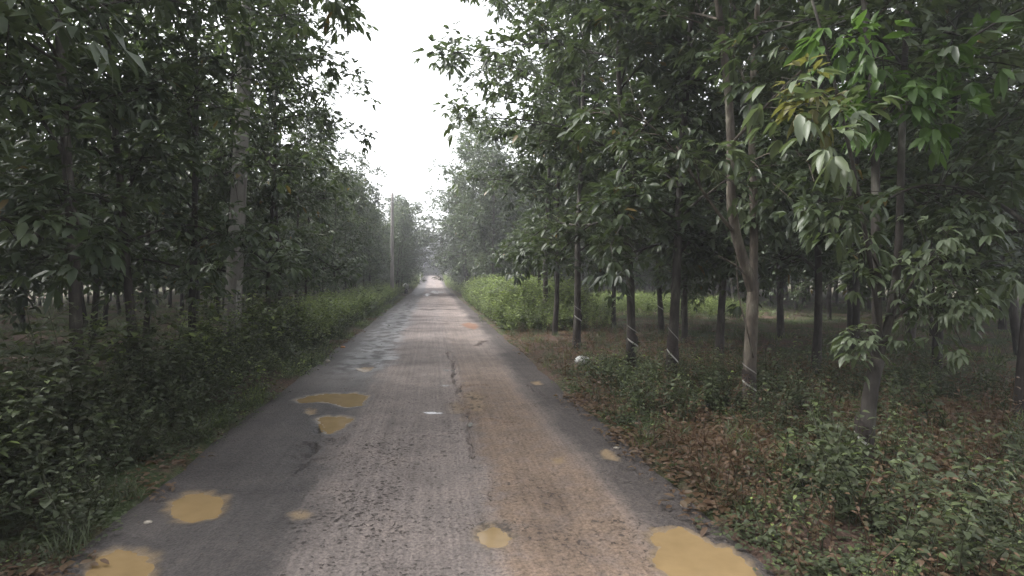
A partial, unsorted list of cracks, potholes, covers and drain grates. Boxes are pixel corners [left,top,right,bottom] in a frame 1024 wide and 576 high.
pothole [460,518,528,556]
pothole [636,525,762,576]
pothole [594,446,627,465]
pothole [460,322,481,330]
pothole [308,414,365,436]
pothole [281,506,317,522]
pothole [288,391,376,410]
pothole [65,539,174,576]
pothole [154,488,243,529]
